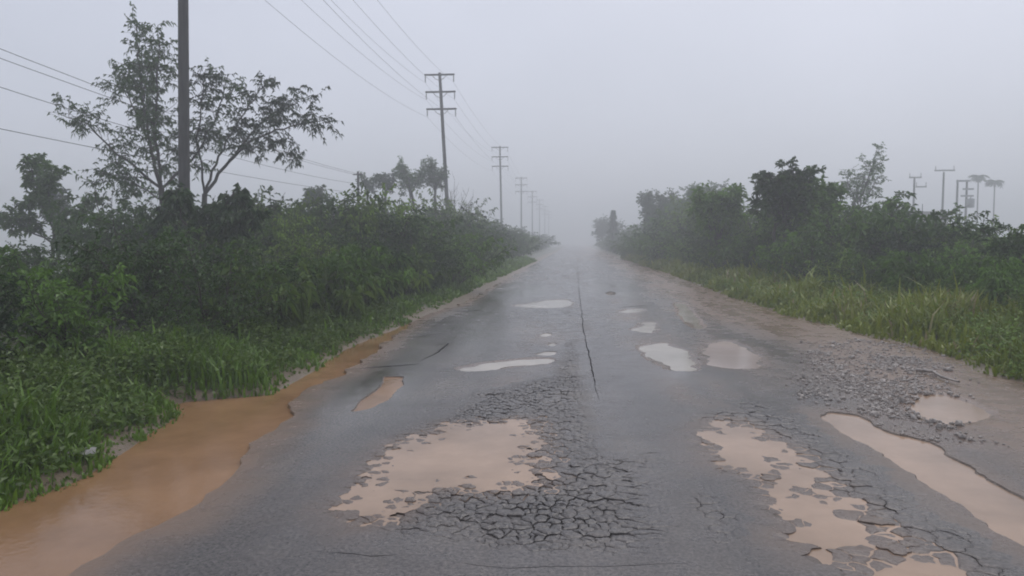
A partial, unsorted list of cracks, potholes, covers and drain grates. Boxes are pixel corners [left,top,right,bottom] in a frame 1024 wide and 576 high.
pothole [351,376,404,411]
pothole [697,339,771,369]
pothole [635,342,703,372]
pothole [697,415,838,481]
crack [309,334,1024,576]
pothole [820,411,1024,546]
pothole [755,487,959,576]
pothole [902,392,1004,426]
pothole [512,299,576,308]
pothole [454,357,557,371]
pothole [328,415,574,527]
pothole [759,466,847,509]
